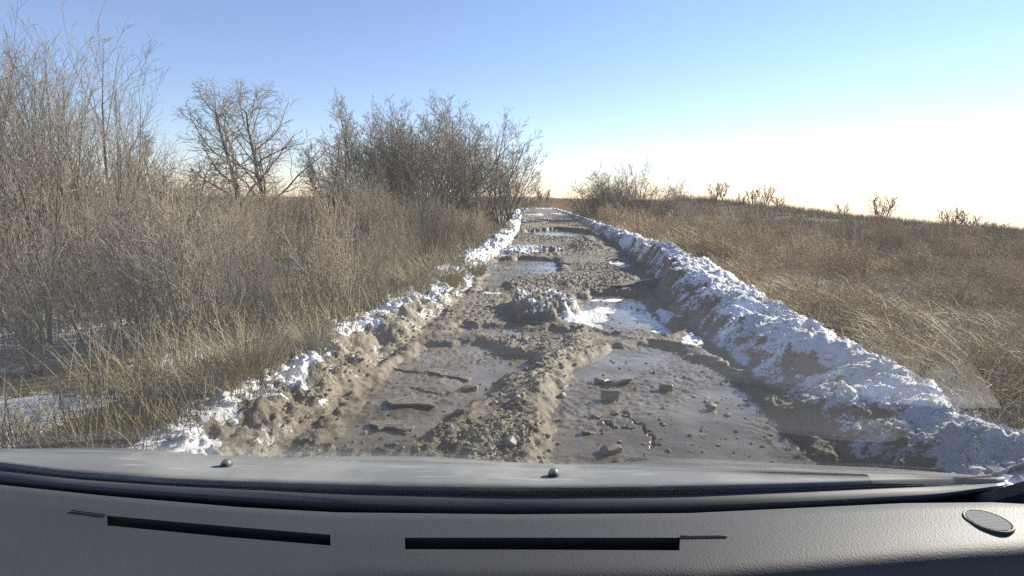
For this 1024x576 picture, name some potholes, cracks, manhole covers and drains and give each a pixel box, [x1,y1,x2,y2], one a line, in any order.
pothole [470,255,569,292]
pothole [569,288,688,335]
pothole [523,226,599,237]
crack [603,414,657,449]
